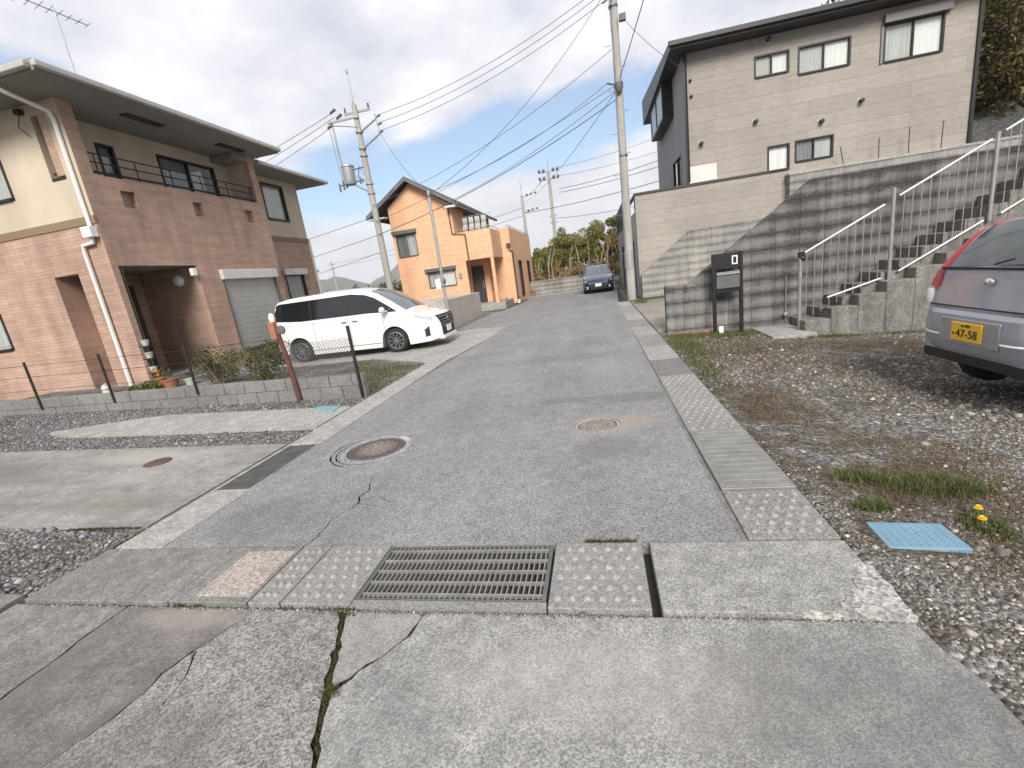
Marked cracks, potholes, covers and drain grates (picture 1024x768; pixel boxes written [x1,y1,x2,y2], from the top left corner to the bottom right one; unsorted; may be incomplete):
drain grate [219,444,317,490]
utility cover [866,522,973,553]
drain grate [355,545,555,605]
crack [311,612,426,768]
crack [310,440,395,543]
manhole cover [143,457,172,468]
crack [43,608,259,767]
manhole cover [339,435,413,463]
manhole cover [575,417,620,433]
